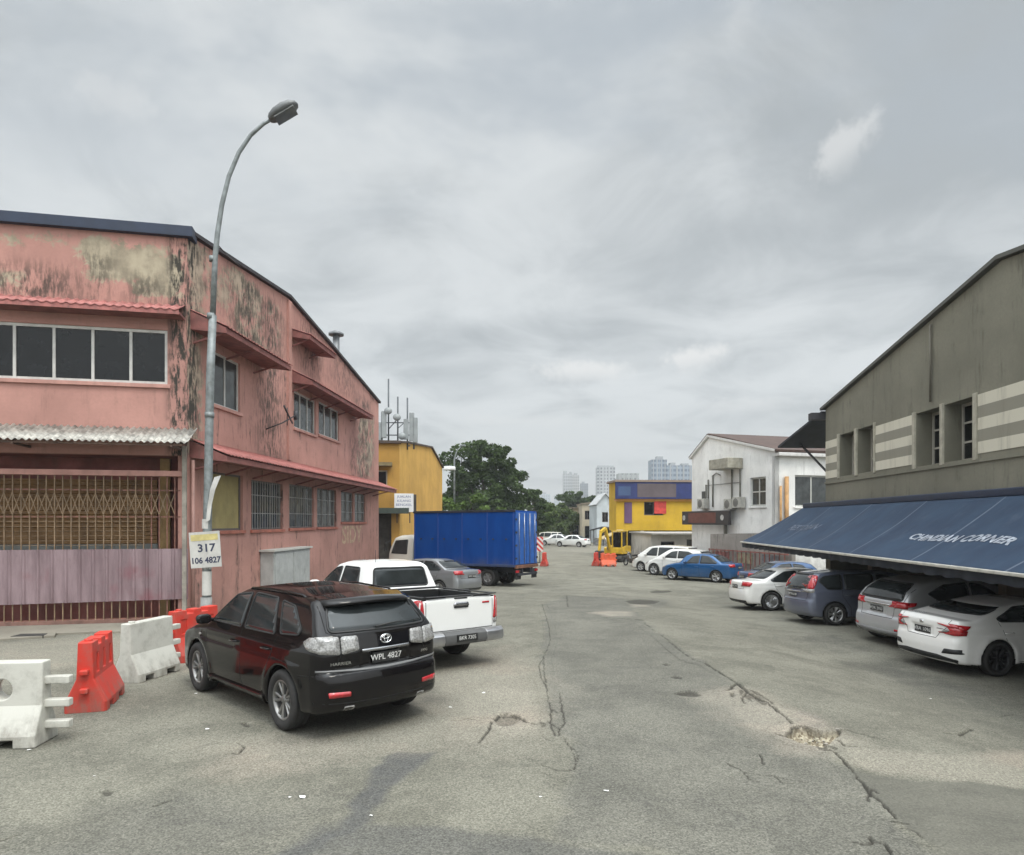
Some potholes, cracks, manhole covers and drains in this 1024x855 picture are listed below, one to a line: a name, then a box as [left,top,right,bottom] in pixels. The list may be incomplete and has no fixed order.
crack [714,712,1024,855]
pothole [762,722,855,754]
crack [213,739,258,759]
pothole [485,710,530,731]
crack [441,604,652,777]
